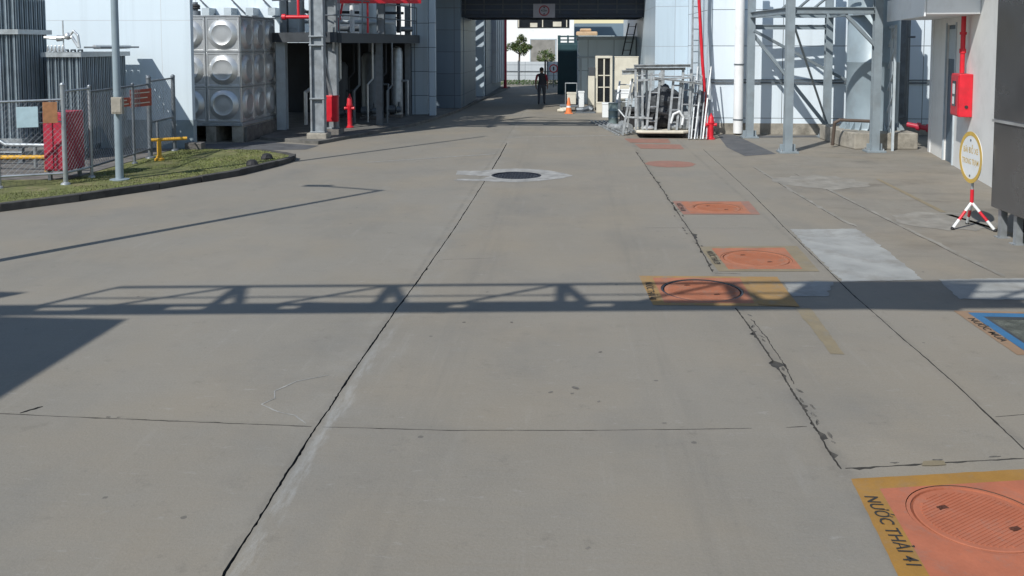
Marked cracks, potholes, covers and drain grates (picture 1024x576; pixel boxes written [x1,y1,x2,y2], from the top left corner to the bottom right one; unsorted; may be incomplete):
manhole cover [906,486,1024,556]
manhole cover [721,251,792,267]
manhole cover [661,280,743,301]
manhole cover [692,204,742,212]
